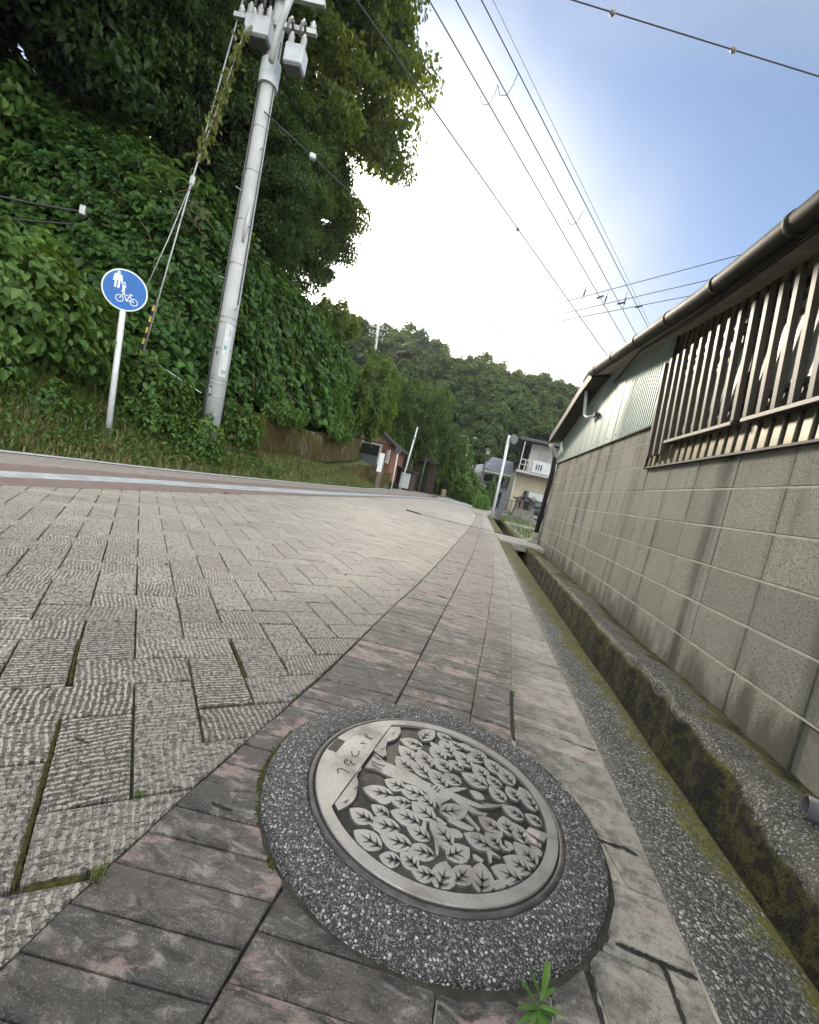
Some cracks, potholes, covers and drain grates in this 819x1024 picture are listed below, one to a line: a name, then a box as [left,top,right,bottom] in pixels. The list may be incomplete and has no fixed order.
crack [585,943,699,1024]
crack [594,829,638,856]
manhole cover [254,703,615,1006]
